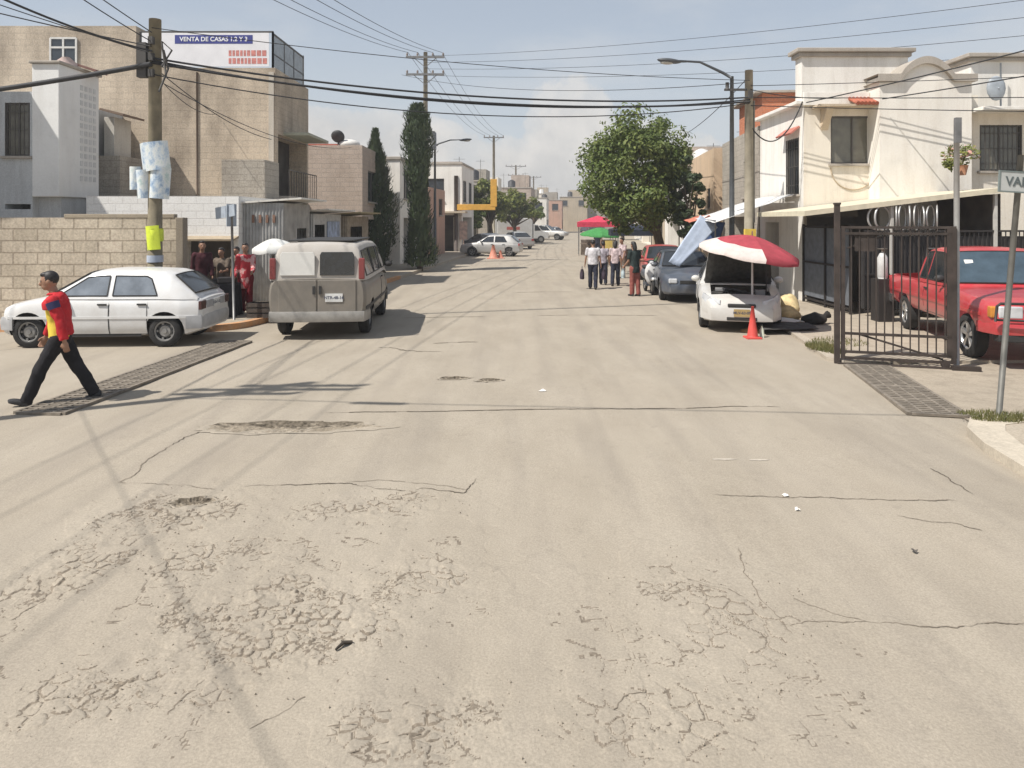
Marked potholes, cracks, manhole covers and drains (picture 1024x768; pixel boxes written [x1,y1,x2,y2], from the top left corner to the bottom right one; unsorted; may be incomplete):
crack [0,430,1024,768]
pothole [163,495,219,508]
pothole [195,420,398,435]
drain grate [13,340,252,415]
drain grate [843,364,971,418]
